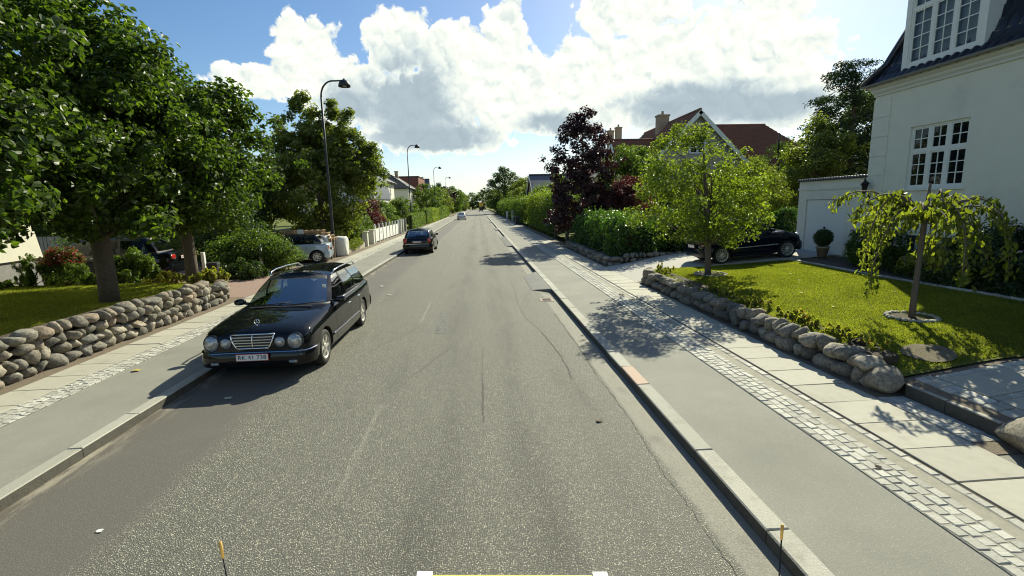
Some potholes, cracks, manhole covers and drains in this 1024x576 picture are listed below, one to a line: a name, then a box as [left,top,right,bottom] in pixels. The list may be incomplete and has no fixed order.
crack [510,280,572,379]
crack [462,349,485,425]
crack [353,323,452,386]
